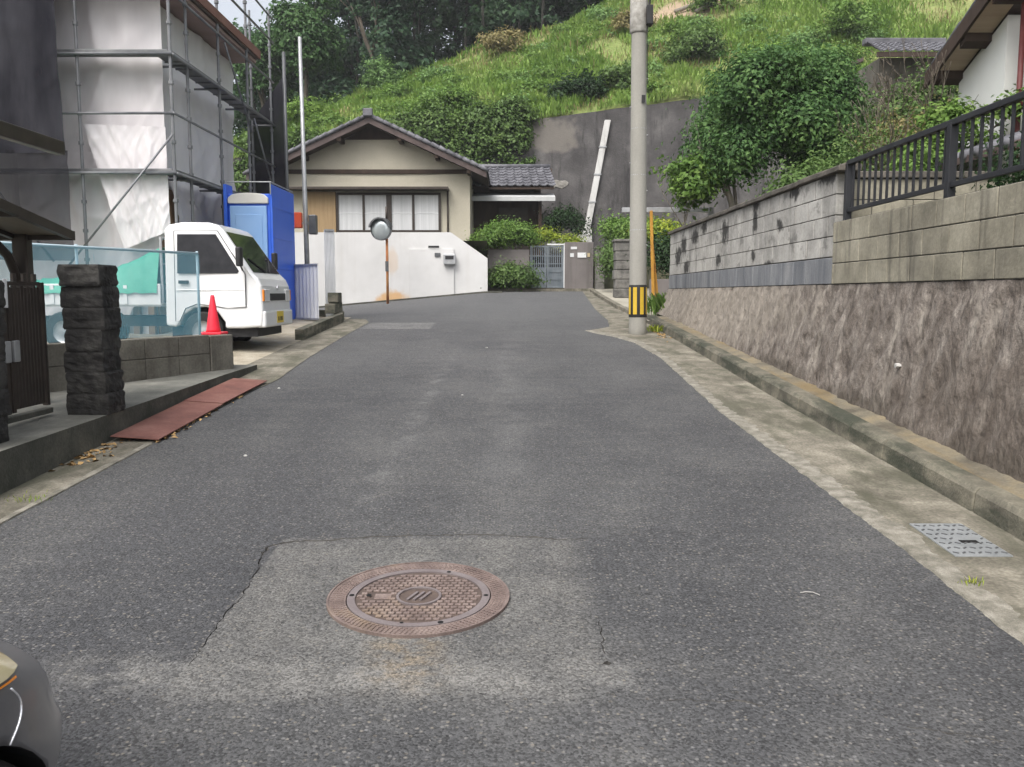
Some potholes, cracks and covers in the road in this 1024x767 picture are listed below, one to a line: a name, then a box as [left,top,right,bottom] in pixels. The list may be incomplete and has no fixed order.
crack [188,534,586,666]
manhole cover [326,562,510,638]
